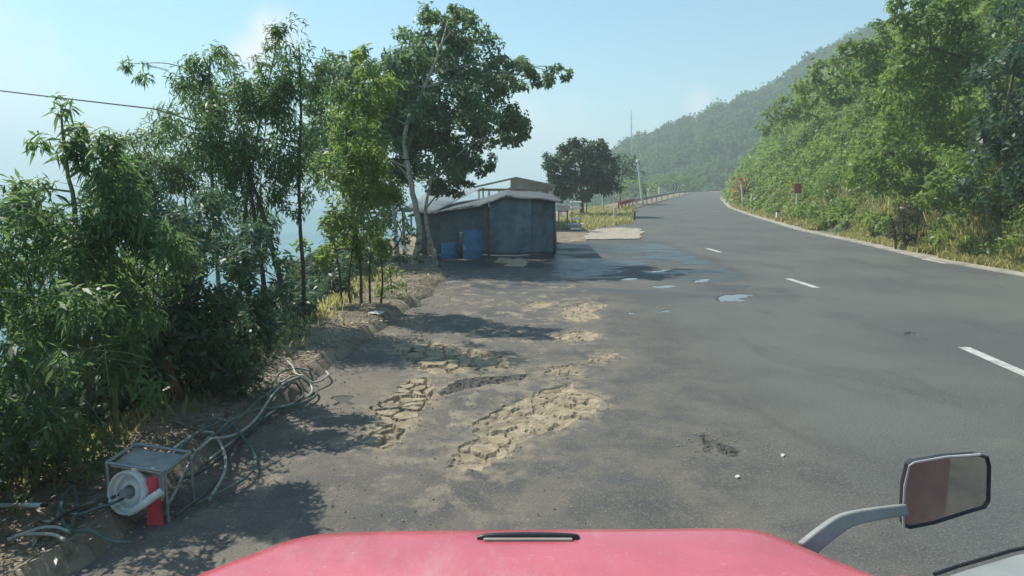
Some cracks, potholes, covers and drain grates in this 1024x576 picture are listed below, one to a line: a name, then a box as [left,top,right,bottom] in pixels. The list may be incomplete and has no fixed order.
pothole [560,302,608,322]
pothole [447,382,602,472]
pothole [545,365,584,377]
pothole [551,331,599,342]
